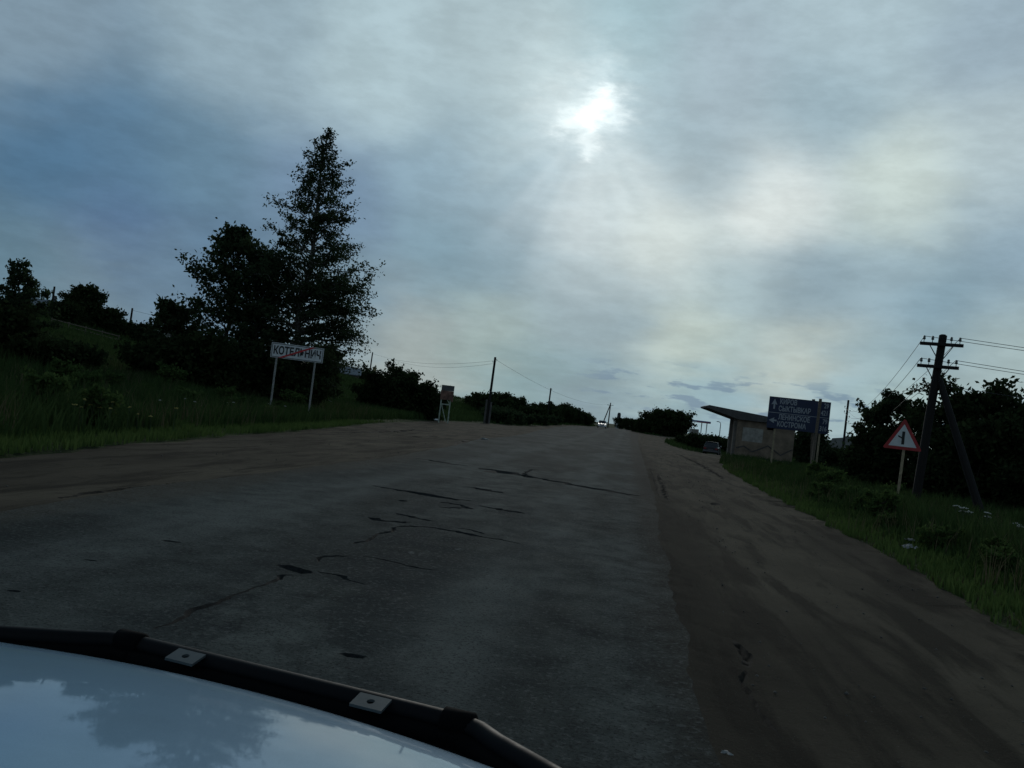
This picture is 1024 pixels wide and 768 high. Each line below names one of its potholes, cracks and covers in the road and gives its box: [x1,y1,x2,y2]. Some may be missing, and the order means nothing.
crack [154,574,287,629]
crack [316,458,638,585]
pothole [277,564,315,574]
